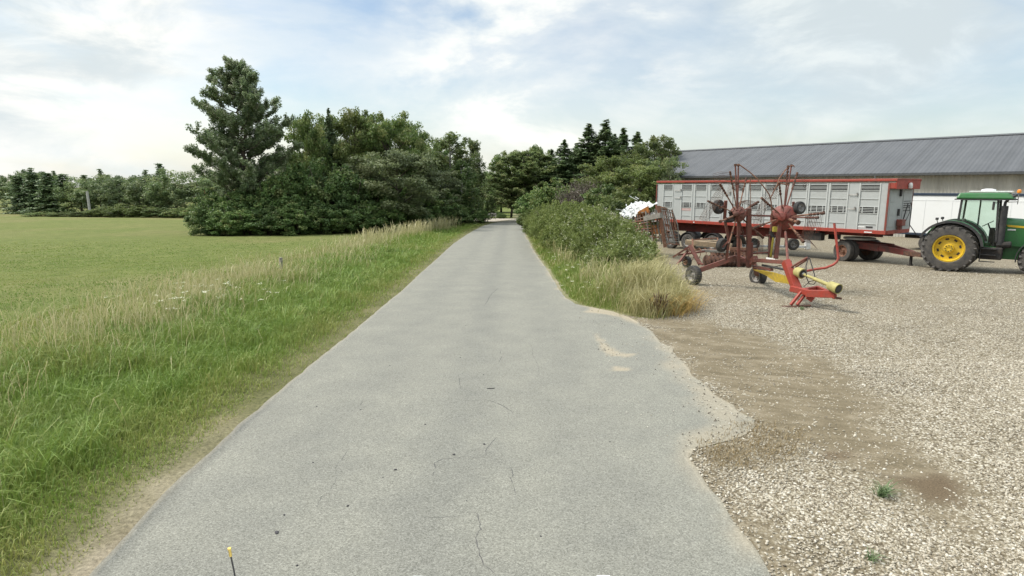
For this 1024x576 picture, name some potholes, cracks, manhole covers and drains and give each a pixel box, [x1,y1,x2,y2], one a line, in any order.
crack [436,512,497,575]
